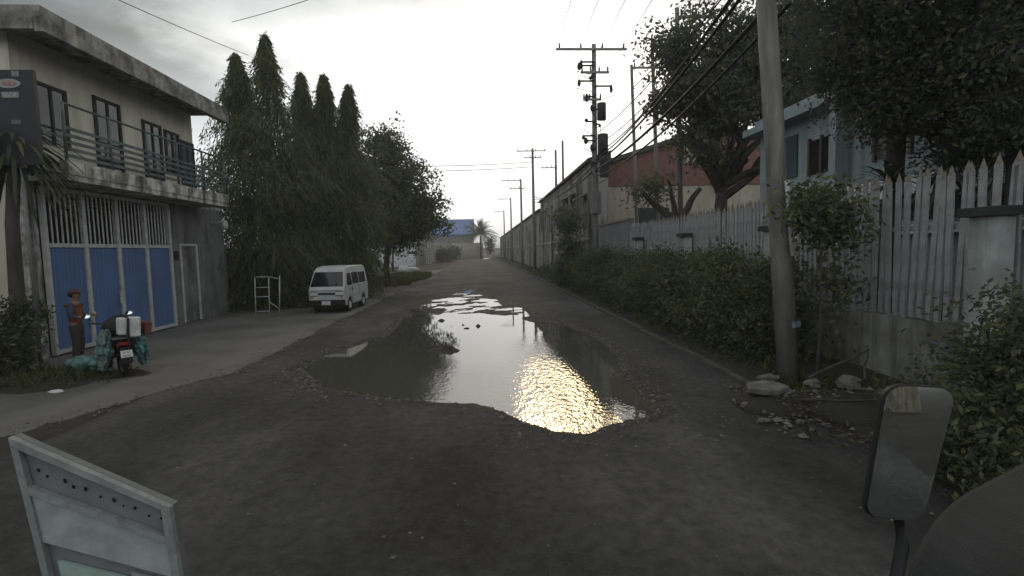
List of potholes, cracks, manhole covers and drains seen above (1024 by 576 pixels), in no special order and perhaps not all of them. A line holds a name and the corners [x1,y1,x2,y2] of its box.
pothole [398,287,545,316]
pothole [286,312,679,439]
